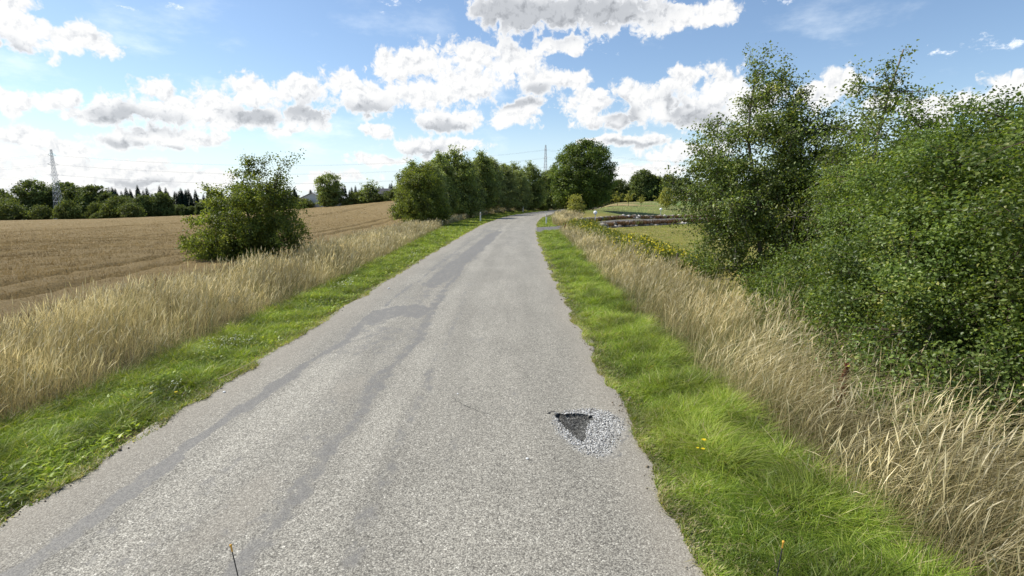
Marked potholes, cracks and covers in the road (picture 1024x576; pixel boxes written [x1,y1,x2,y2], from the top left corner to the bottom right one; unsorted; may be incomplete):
pothole [555,413,594,442]
